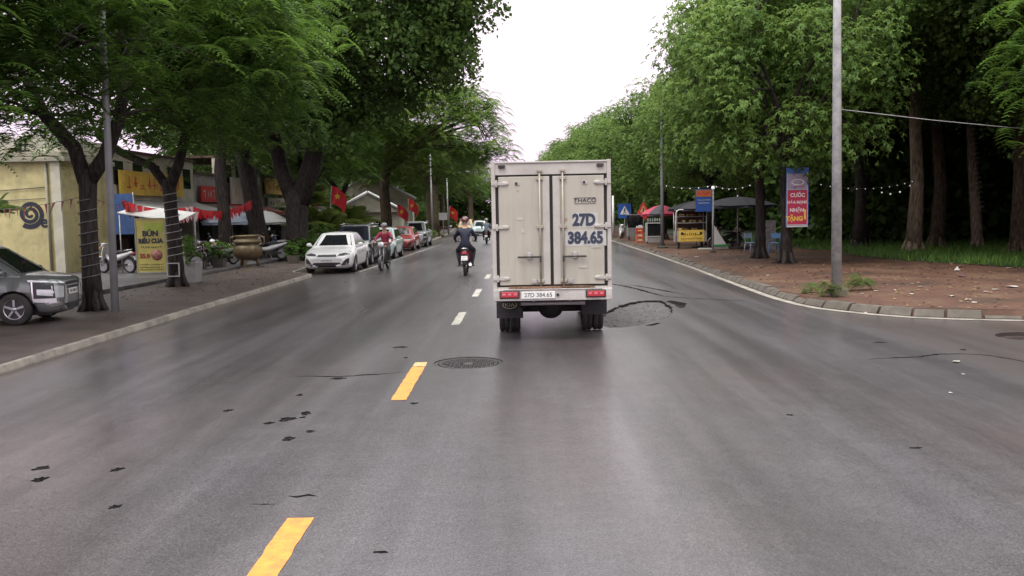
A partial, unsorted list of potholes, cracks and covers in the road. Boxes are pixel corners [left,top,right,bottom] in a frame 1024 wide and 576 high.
manhole cover [995,332,1024,340]
pothole [603,300,673,328]
crack [876,354,1024,362]
manhole cover [434,357,503,369]
